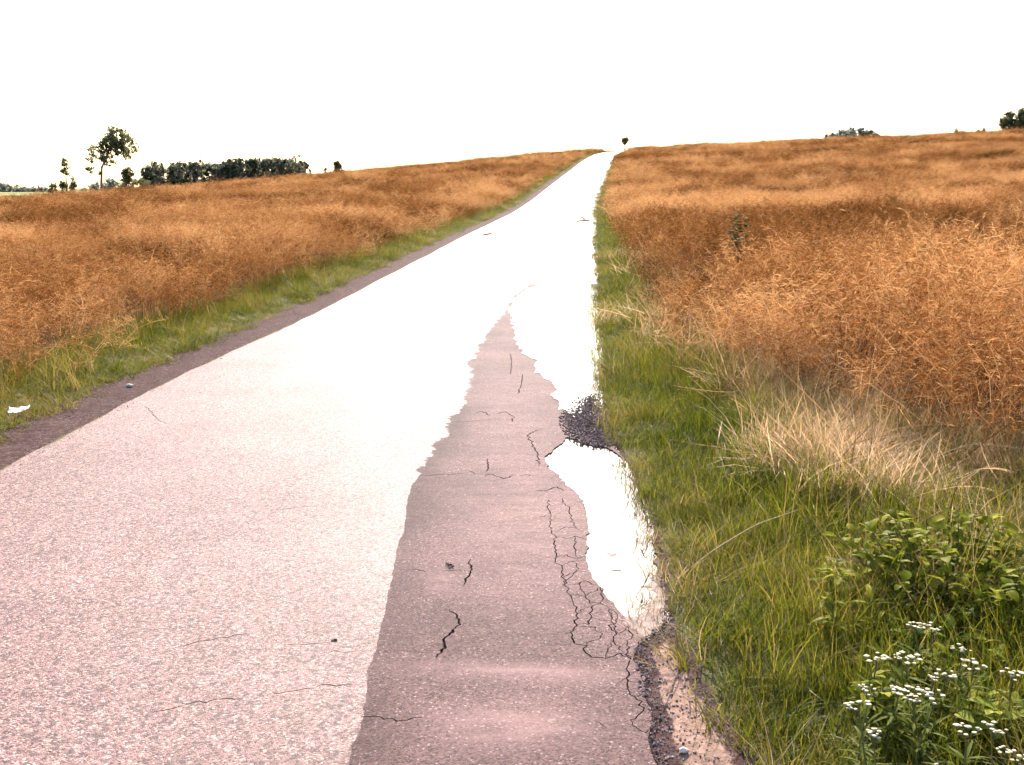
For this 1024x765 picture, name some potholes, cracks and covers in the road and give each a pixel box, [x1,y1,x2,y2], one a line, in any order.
pothole [545,437,666,638]
crack [544,500,643,731]
crack [436,609,461,658]
